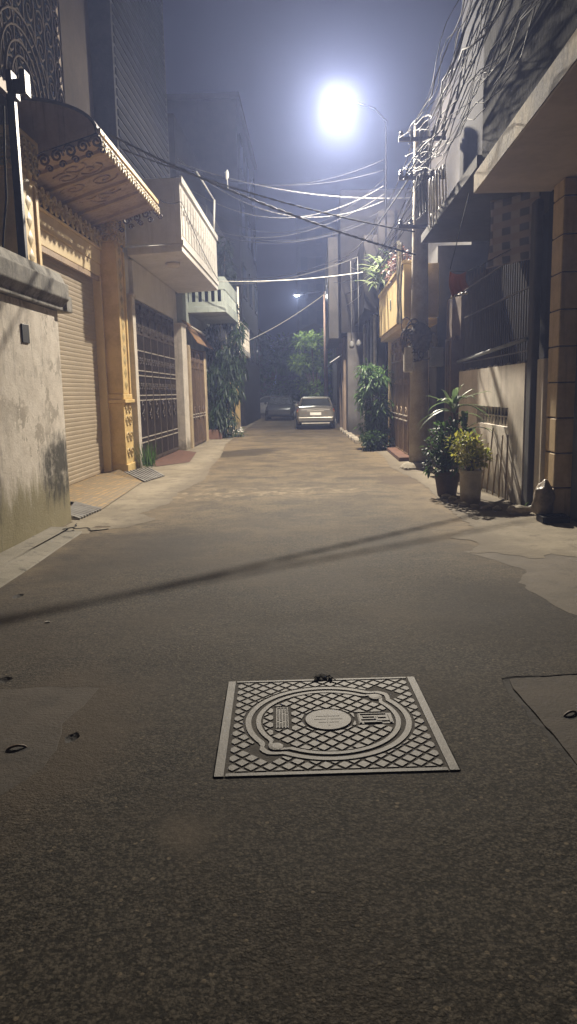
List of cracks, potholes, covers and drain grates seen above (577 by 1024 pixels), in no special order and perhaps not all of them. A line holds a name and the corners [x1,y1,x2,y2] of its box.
manhole cover [214,677,460,779]
pothole [65,732,80,743]
